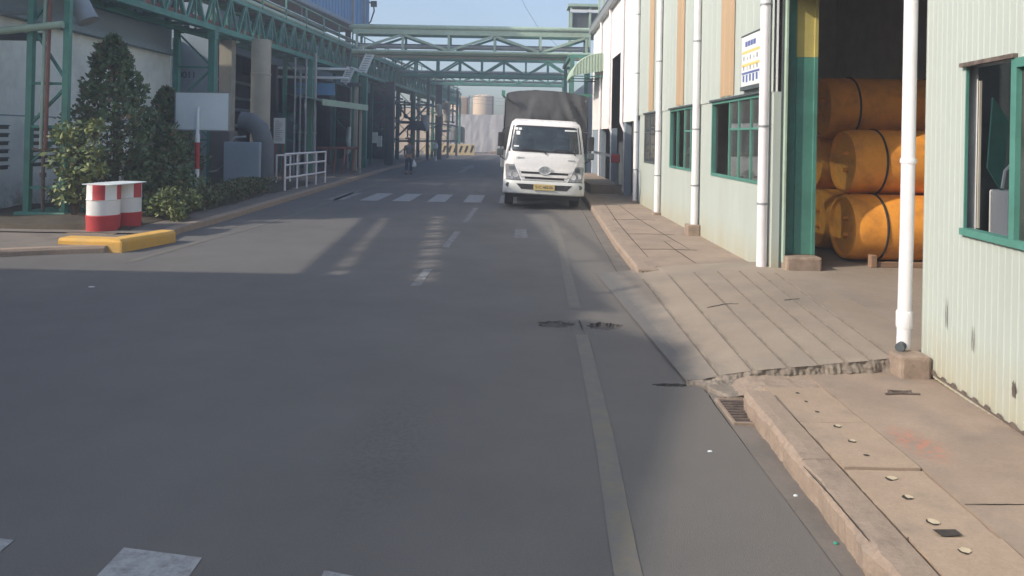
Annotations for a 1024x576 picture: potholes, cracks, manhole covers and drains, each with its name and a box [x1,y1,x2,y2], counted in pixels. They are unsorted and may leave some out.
pothole [587,322,624,330]
drain grate [706,384,755,426]
